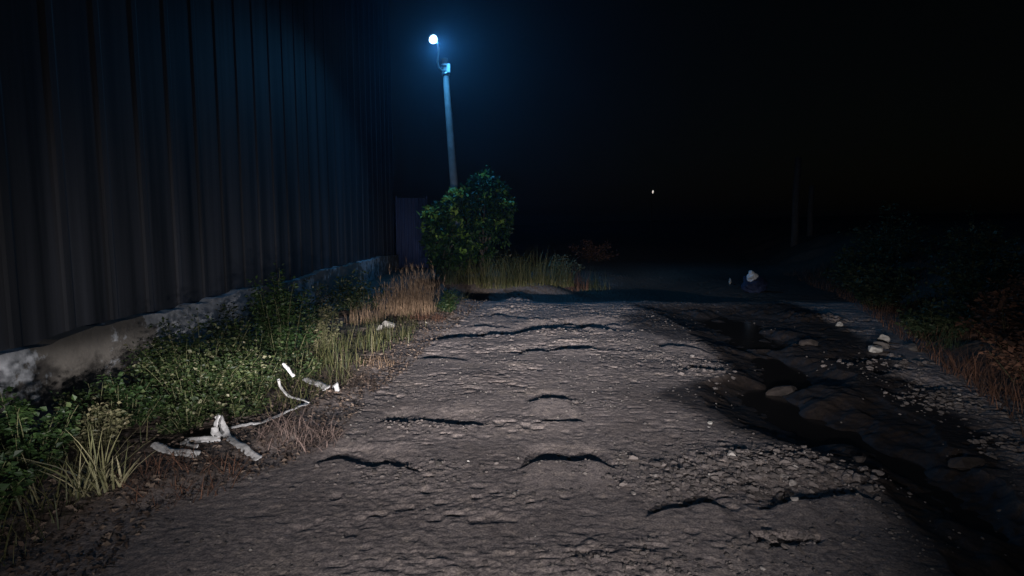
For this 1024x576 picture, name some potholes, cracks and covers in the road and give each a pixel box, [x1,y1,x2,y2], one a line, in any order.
pothole [746,528,827,550]
crack [419,311,629,362]
